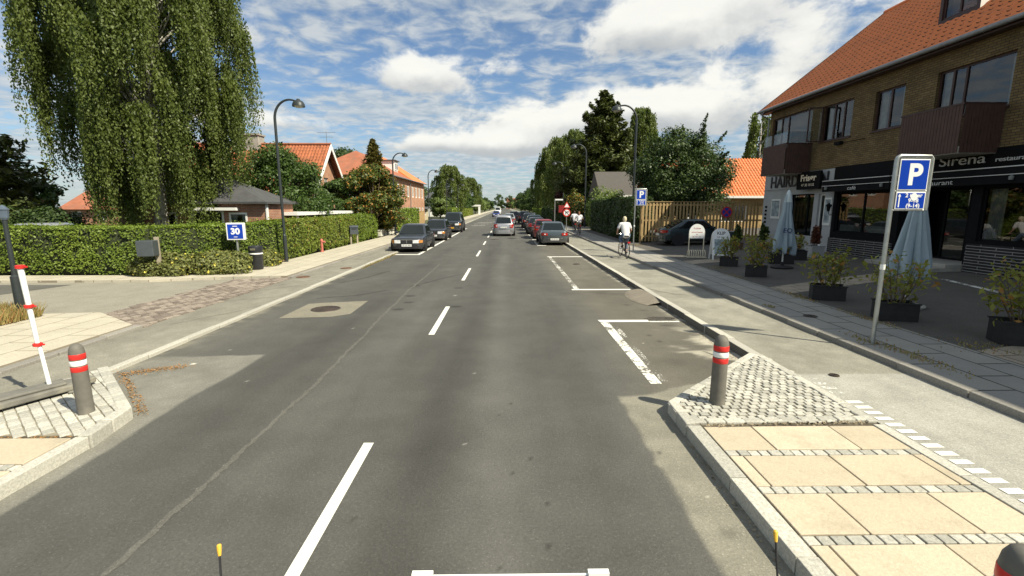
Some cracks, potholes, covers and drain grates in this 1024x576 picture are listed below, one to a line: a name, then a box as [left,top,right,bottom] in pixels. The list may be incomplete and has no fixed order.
manhole cover [280,301,367,318]
